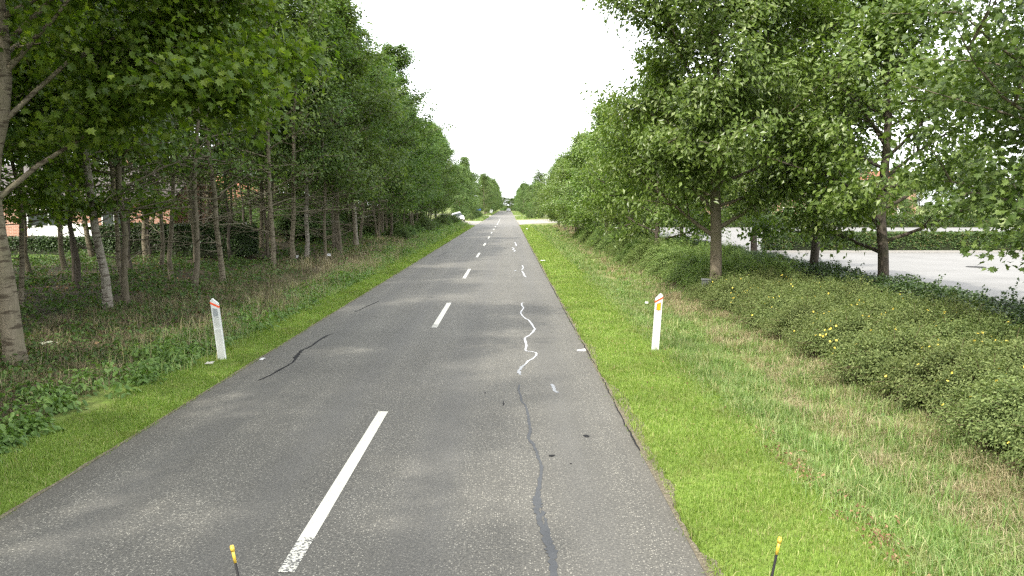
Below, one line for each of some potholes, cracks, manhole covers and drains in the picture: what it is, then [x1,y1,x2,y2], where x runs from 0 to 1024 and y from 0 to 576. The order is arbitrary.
crack [524,235,640,450]
crack [259,334,330,380]
